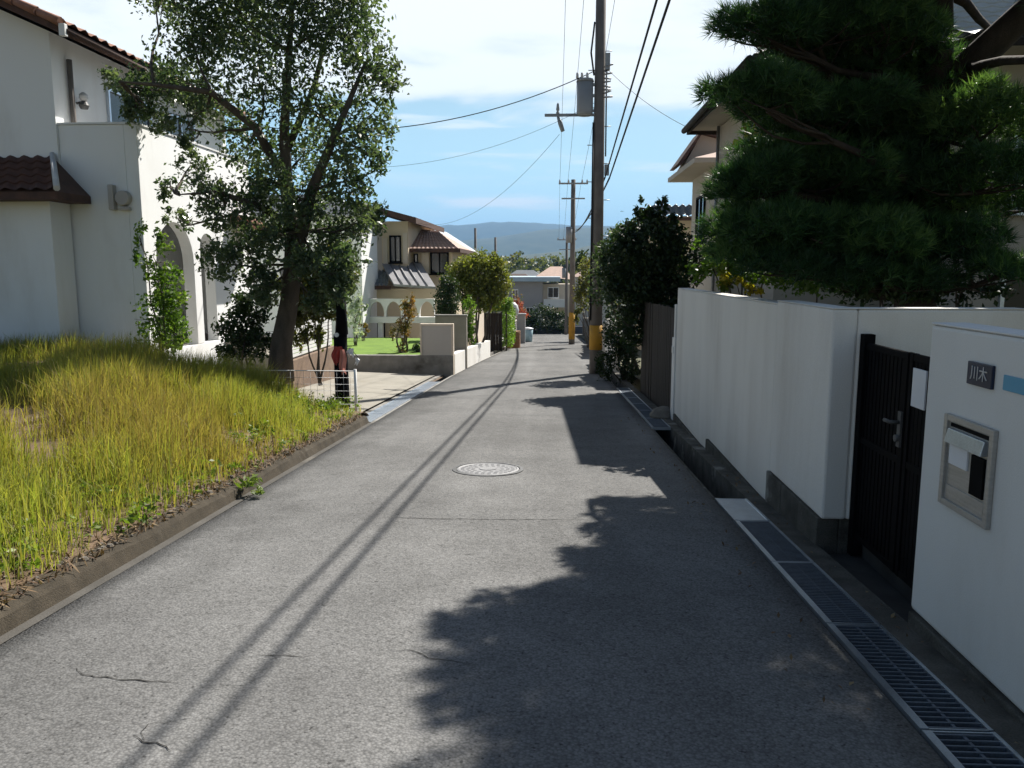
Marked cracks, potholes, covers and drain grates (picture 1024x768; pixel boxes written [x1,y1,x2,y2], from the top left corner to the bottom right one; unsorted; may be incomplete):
crack [134,722,169,750]
drain grate [630,403,652,411]
manhole cover [452,462,524,476]
drain grate [643,418,671,430]
drain grate [771,561,880,627]
drain grate [826,623,994,734]
crack [76,668,180,683]
drain grate [735,520,814,564]
drain grate [921,730,1024,768]
